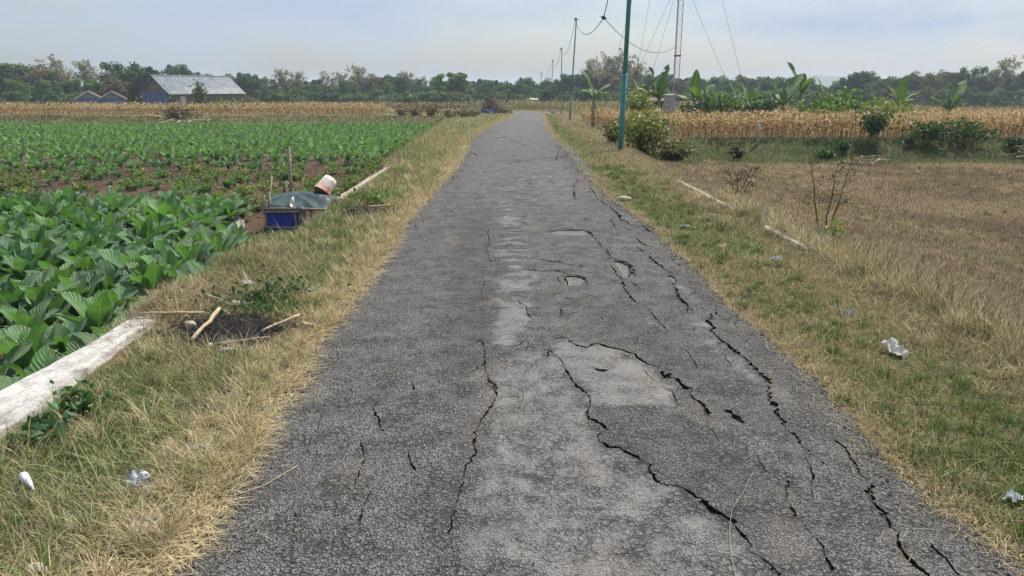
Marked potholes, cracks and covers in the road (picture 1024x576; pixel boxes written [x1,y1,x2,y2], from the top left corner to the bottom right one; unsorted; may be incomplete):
crack [354,401,384,529]
pothole [564,276,585,286]
pothole [614,260,632,277]
crack [832,438,960,576]
crack [447,191,541,534]
crack [542,179,828,575]
